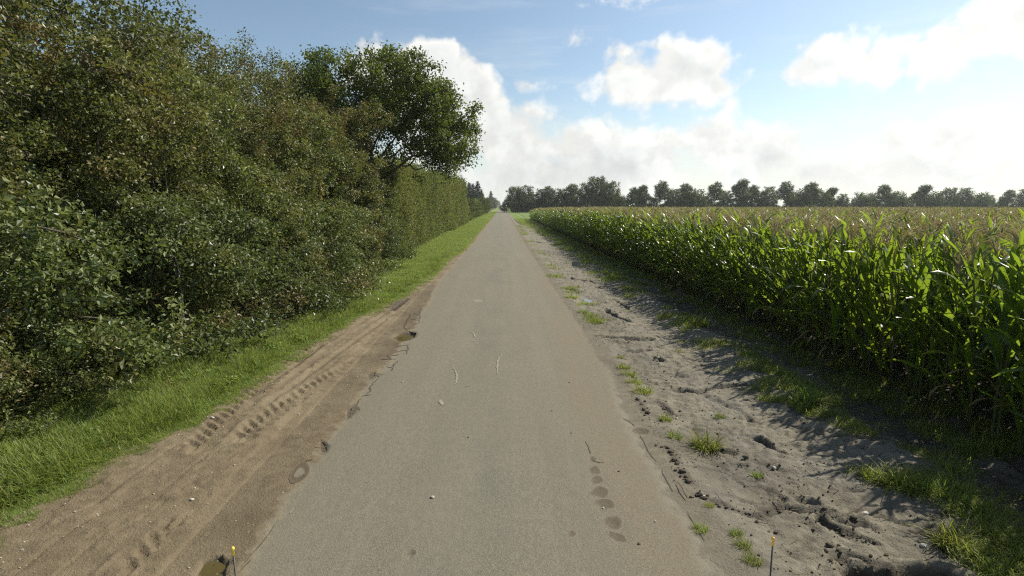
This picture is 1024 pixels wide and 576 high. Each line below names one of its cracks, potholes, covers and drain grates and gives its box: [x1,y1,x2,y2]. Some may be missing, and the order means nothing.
pothole [289,461,310,483]
pothole [390,331,419,342]
pothole [186,549,239,576]
pothole [341,404,361,421]
crack [348,308,422,418]
